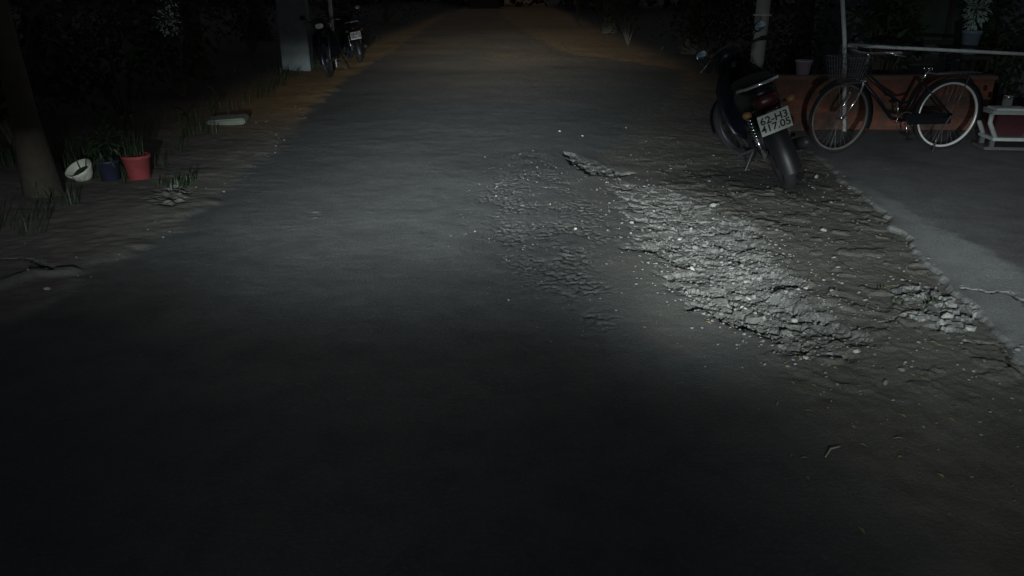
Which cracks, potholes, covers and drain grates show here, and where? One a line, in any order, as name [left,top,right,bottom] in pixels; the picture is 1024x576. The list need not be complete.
crack [962,340,1024,375]
pothole [879,283,990,338]
pothole [606,182,873,362]
crack [462,152,722,333]
crack [878,311,918,324]
crack [960,287,1024,303]
crack [2,258,58,270]
